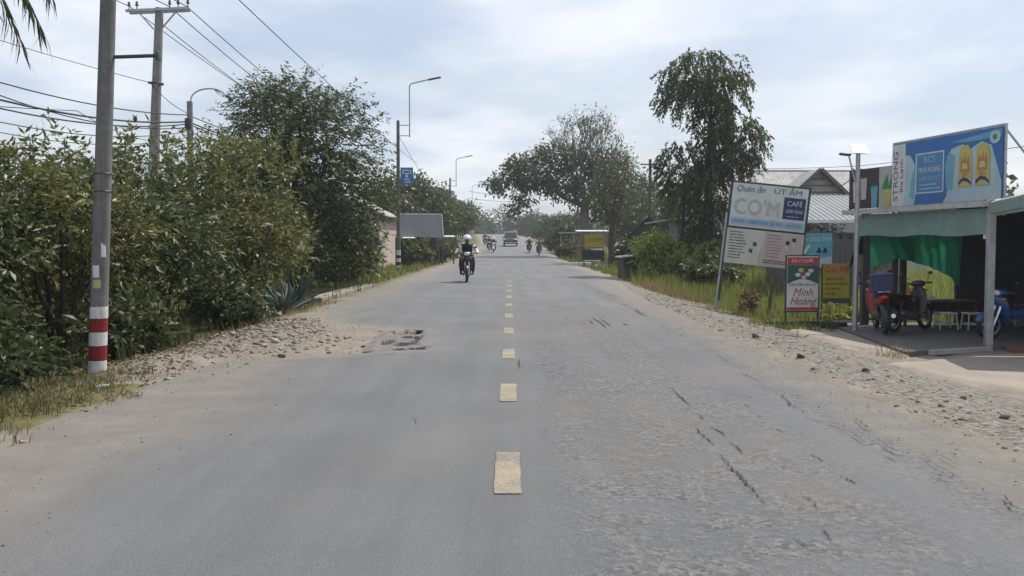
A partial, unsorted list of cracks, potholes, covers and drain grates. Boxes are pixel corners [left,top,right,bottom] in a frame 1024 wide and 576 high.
crack [721,357,904,462]
crack [670,386,765,503]
pothole [362,329,432,352]
